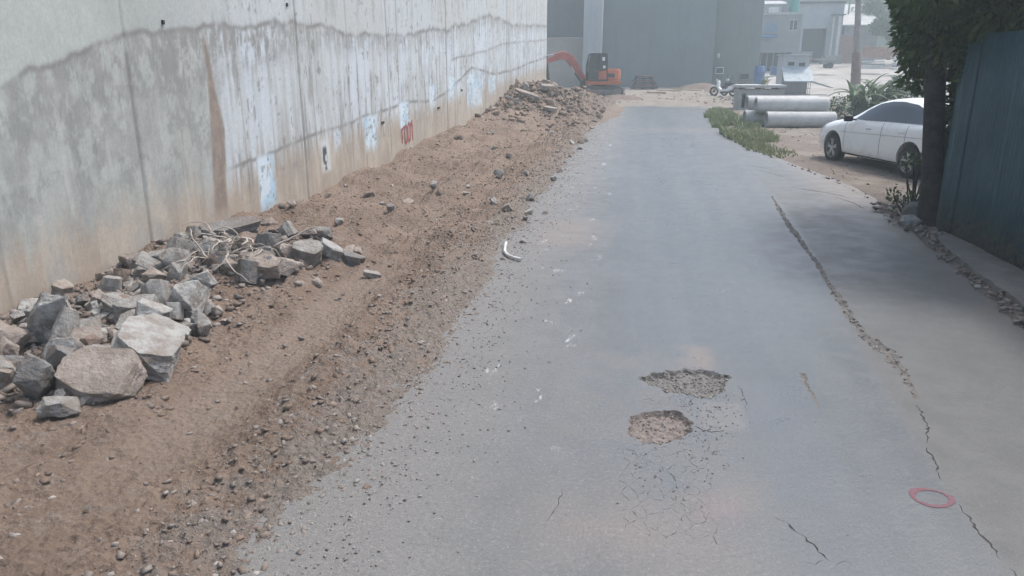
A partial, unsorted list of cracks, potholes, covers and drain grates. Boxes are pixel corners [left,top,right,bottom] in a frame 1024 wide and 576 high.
pothole [638,368,732,399]
crack [775,517,854,565]
pothole [627,410,694,445]
crack [619,447,717,544]
crack [798,373,820,408]
